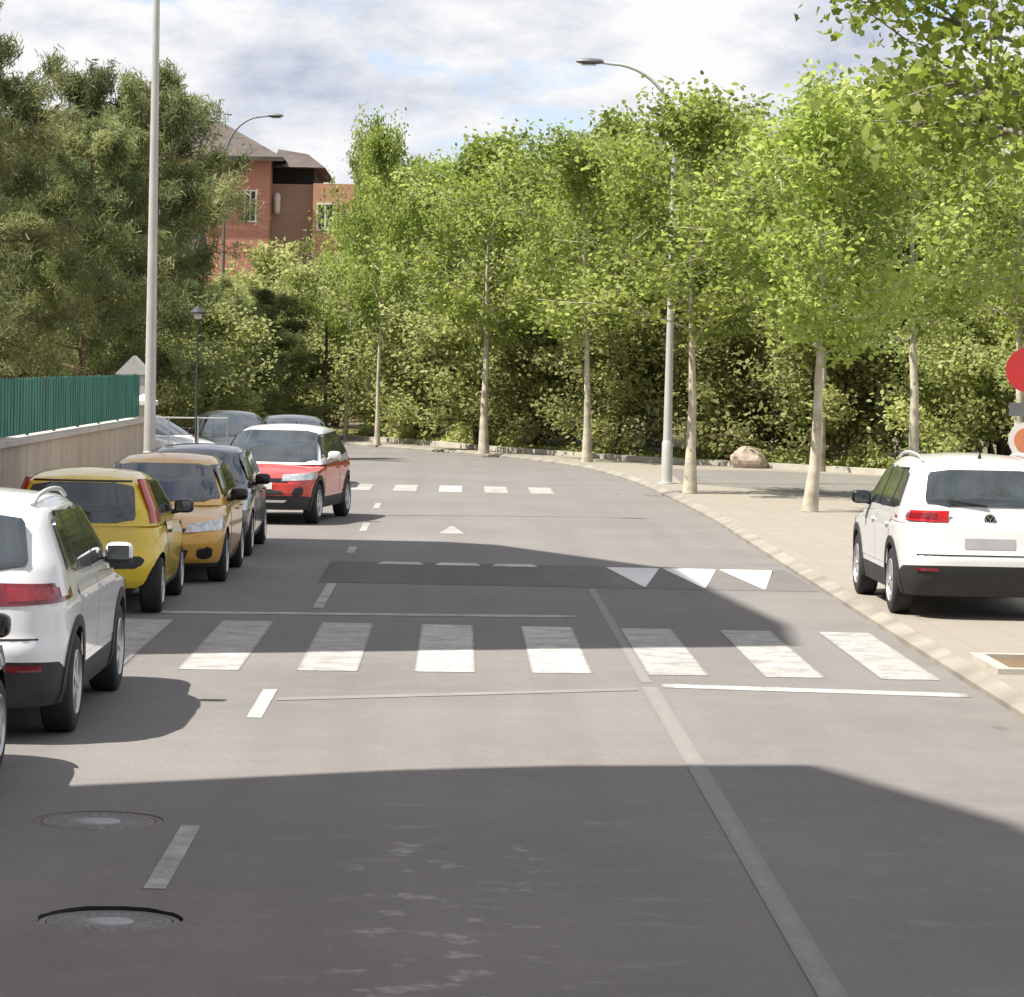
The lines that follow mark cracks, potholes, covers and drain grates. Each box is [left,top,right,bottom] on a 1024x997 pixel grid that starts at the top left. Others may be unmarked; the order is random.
manhole cover [38,910,180,933]
manhole cover [34,812,163,831]
